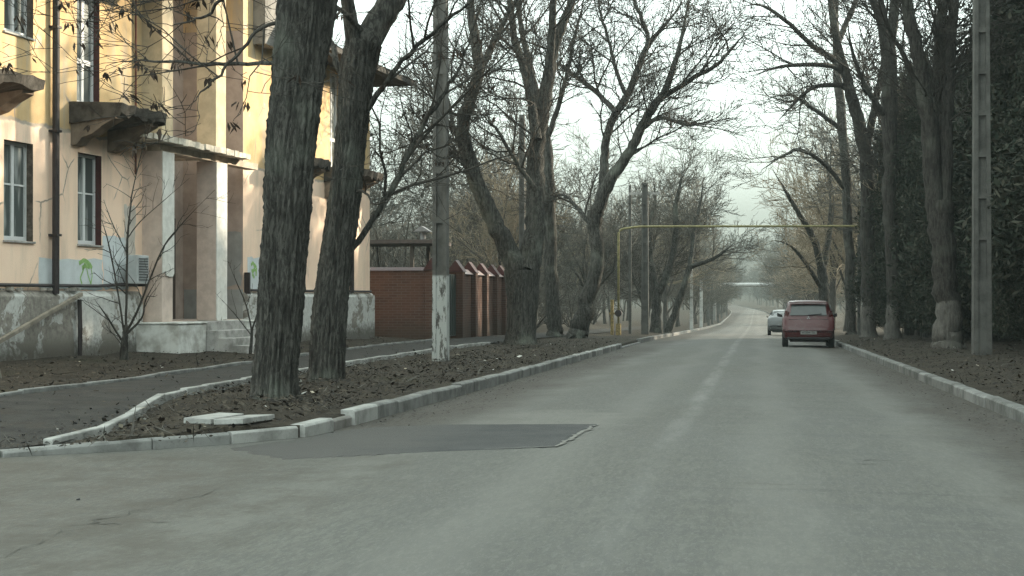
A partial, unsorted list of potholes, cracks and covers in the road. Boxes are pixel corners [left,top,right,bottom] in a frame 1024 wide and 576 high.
crack [7,489,216,556]
